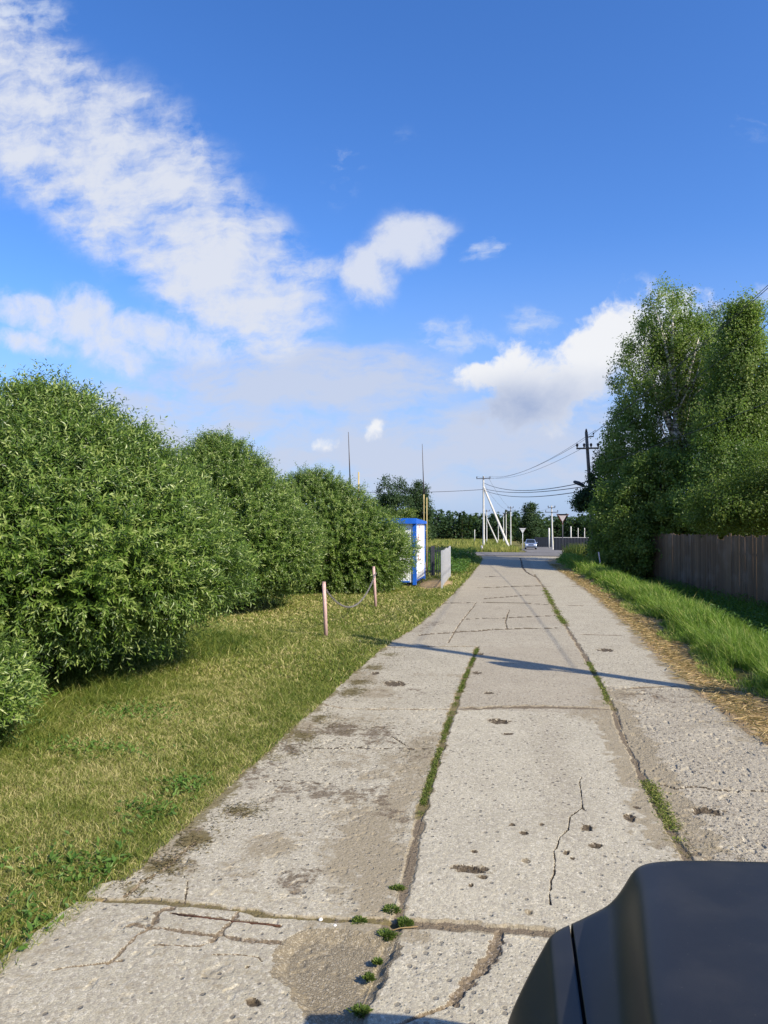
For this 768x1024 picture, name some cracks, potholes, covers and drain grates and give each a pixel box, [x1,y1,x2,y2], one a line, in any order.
pothole [450,864,489,874]
crack [419,558,558,643]
pothole [693,807,724,816]
crack [549,777,586,905]
crack [52,842,283,971]
crack [396,930,505,1024]
